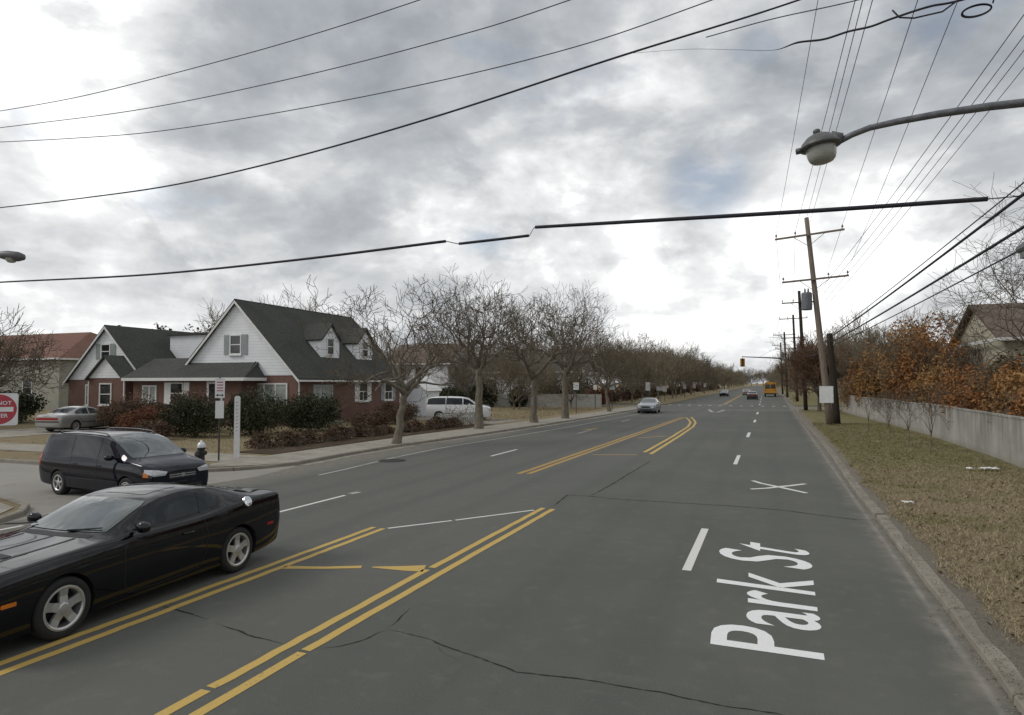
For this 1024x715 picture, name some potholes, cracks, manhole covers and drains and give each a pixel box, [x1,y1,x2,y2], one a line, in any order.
crack [162,606,279,643]
crack [328,607,782,715]
